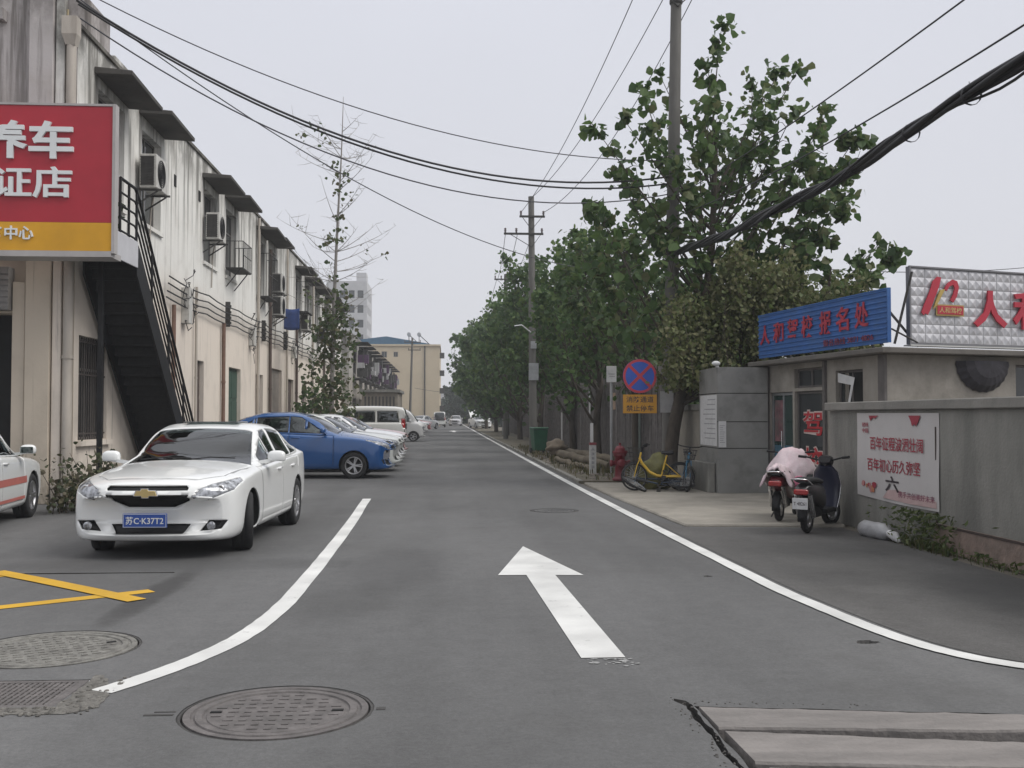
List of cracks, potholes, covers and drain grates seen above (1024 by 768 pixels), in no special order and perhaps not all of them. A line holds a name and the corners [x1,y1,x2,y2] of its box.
drain grate [0,680,89,707]
manhole cover [0,631,142,669]
manhole cover [143,686,386,741]
crack [670,697,859,768]
